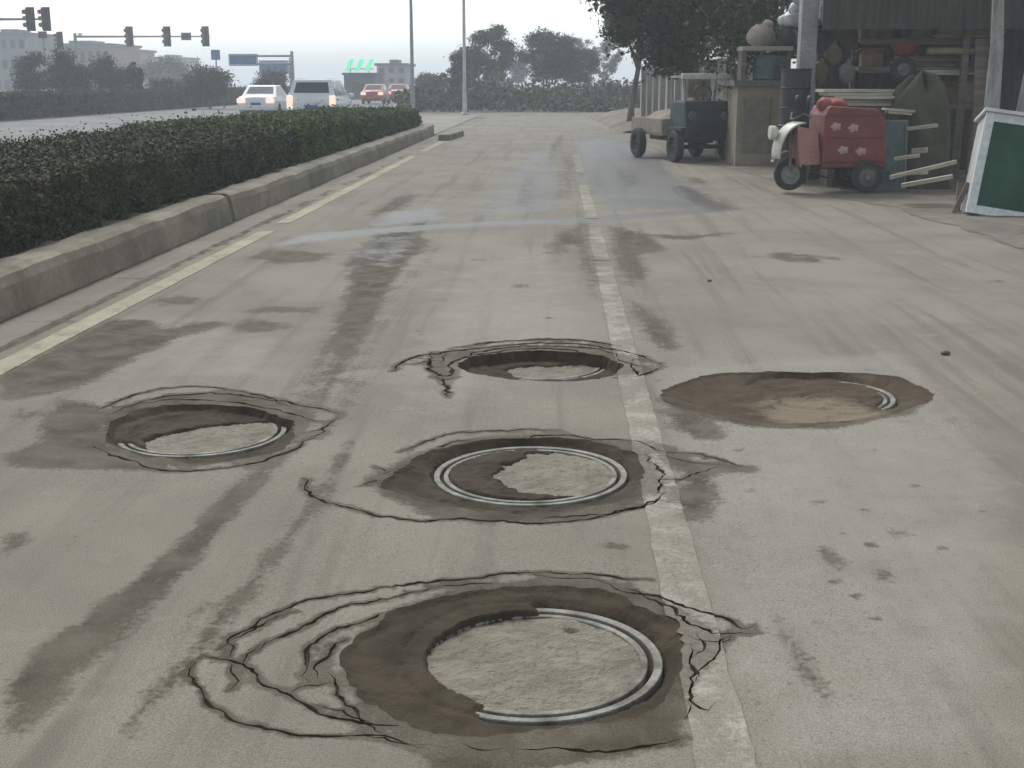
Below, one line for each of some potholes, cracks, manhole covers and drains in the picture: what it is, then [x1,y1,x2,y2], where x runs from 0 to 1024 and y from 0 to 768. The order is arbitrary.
pothole [105,404,295,464]
manhole cover [427,608,663,726]
pothole [379,437,645,515]
manhole cover [839,381,896,411]
crack [93,386,752,525]
pothole [660,371,934,425]
crack [188,572,754,753]
pothole [457,350,624,382]
manhole cover [508,365,605,380]
crack [395,338,661,396]
